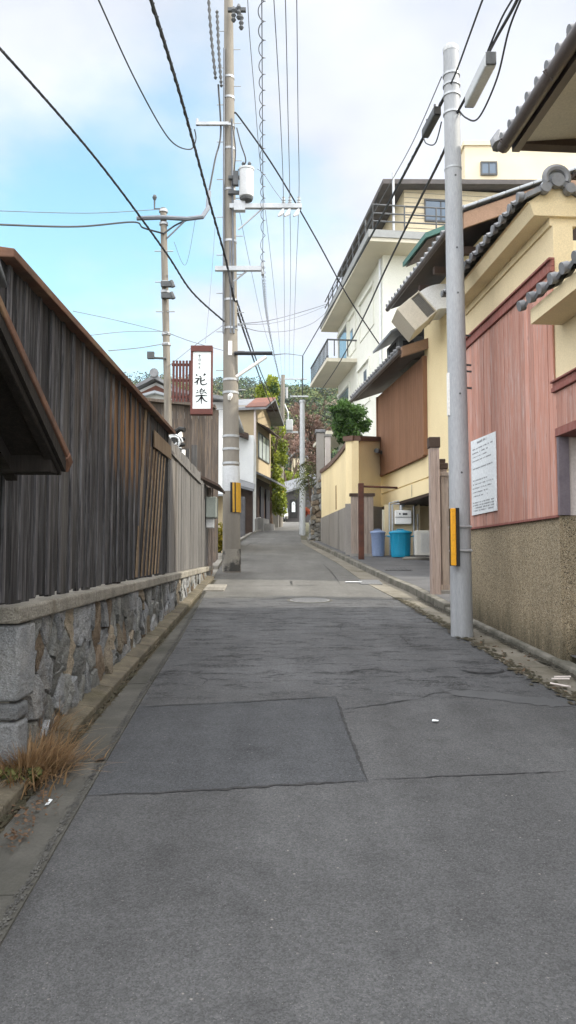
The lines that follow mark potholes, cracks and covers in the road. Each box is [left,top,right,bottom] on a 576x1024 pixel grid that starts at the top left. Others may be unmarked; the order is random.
crack [343,689,458,713]
